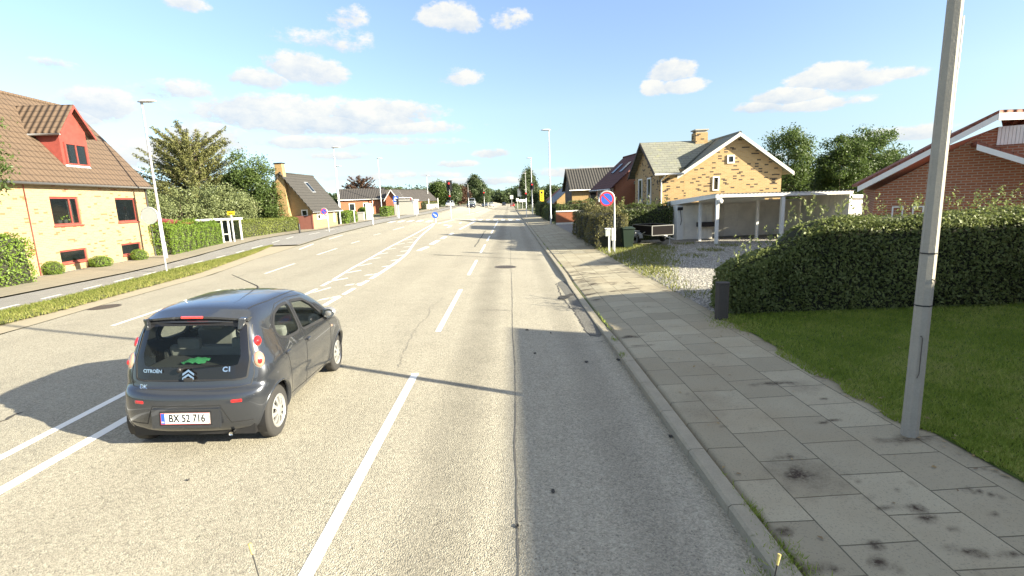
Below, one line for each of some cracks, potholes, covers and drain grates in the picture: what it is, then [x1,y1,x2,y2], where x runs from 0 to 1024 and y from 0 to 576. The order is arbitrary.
crack [398,297,442,367]
